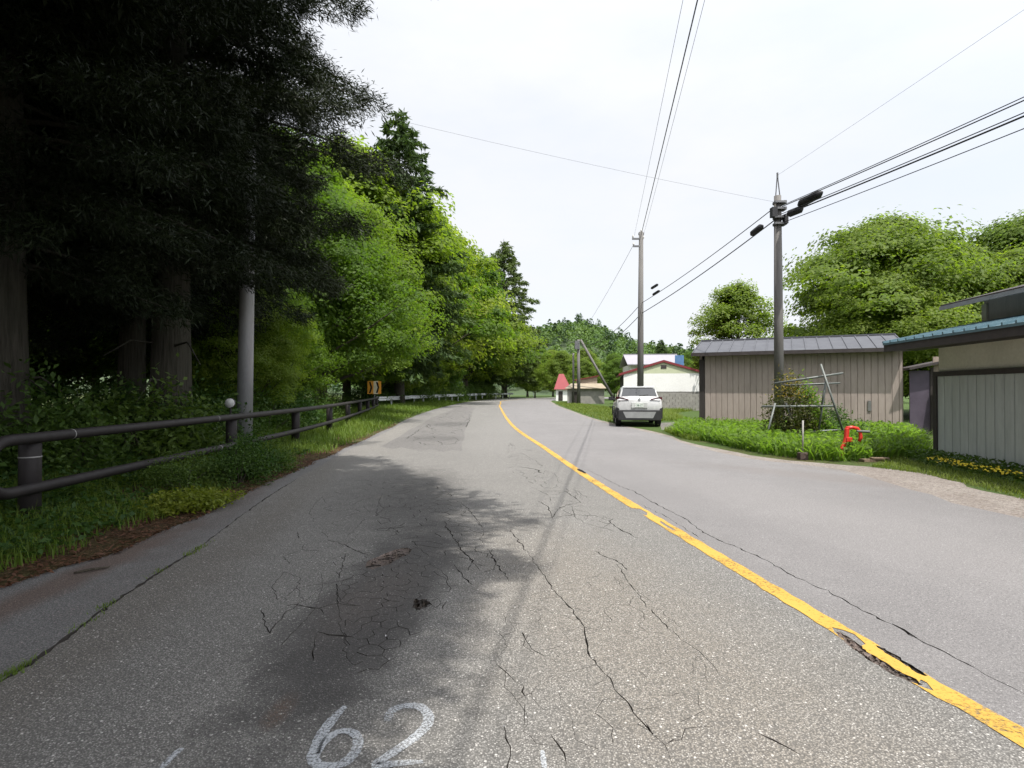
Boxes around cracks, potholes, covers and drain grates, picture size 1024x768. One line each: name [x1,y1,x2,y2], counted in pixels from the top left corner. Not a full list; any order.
crack [260,479,509,673]
crack [492,530,722,768]
pothole [365,548,411,570]
pothole [836,631,922,685]
pothole [412,599,431,608]
crack [592,472,1024,694]
